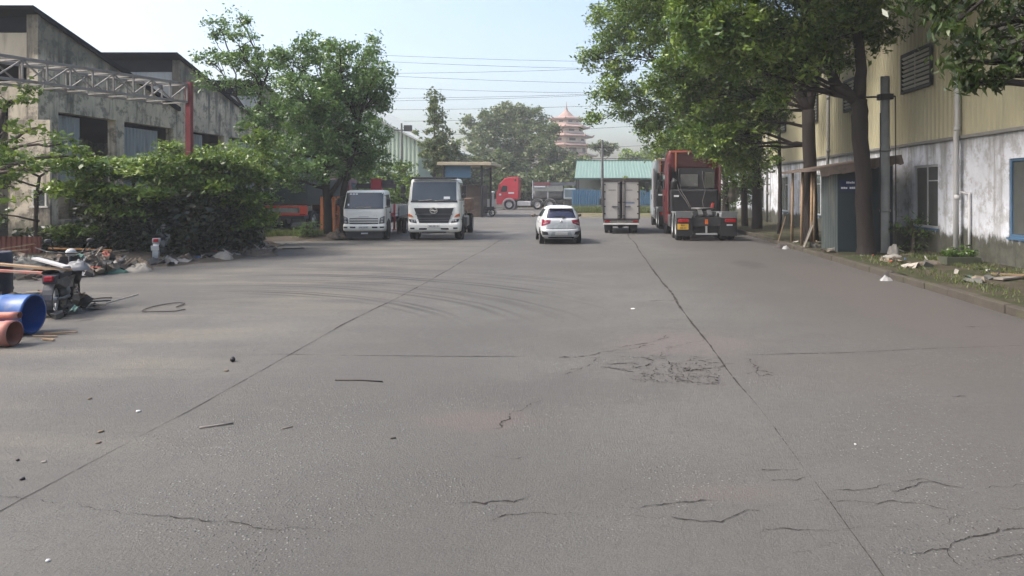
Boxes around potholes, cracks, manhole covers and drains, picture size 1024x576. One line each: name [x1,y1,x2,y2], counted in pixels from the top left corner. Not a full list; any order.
crack [461,498,579,522]
crack [6,496,331,531]
crack [623,487,759,522]
crack [767,525,902,553]
crack [805,478,1020,565]
